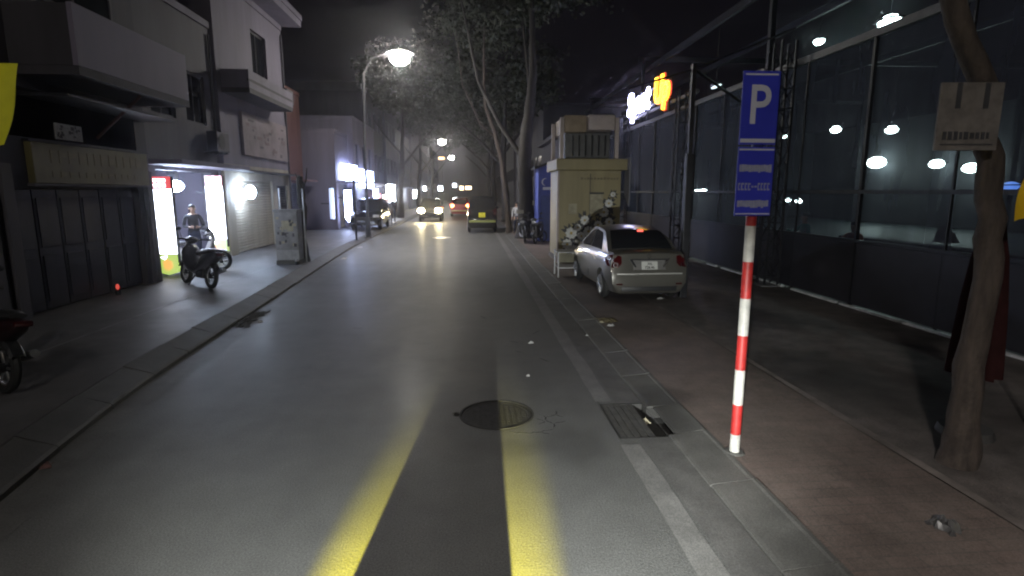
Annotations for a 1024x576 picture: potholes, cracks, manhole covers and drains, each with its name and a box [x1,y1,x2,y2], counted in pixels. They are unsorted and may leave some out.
manhole cover [459,400,534,430]
